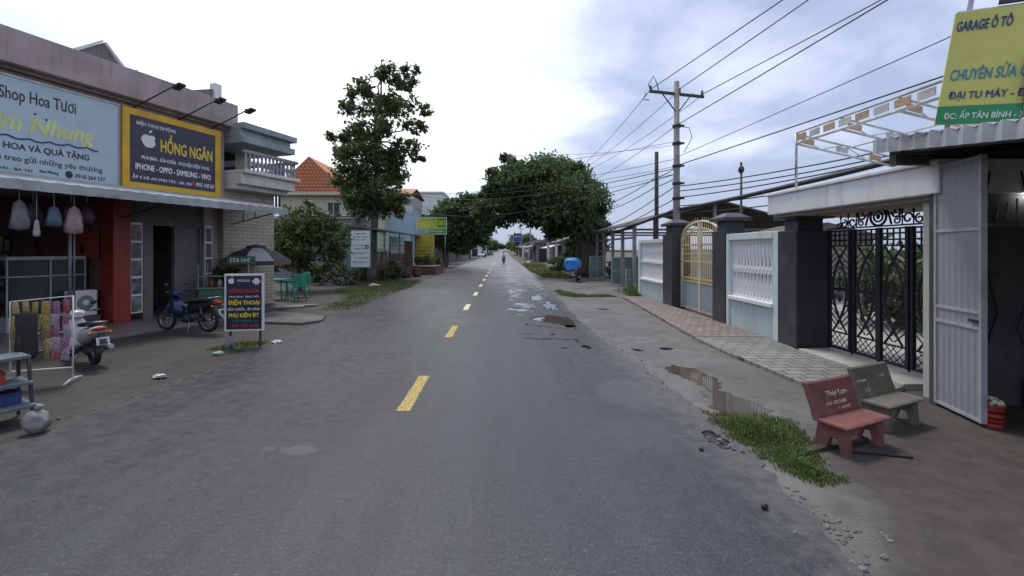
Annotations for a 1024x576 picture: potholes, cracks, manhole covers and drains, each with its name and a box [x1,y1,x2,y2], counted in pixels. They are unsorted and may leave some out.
pothole [531,315,577,330]
crack [519,324,582,343]
pothole [701,430,745,453]
